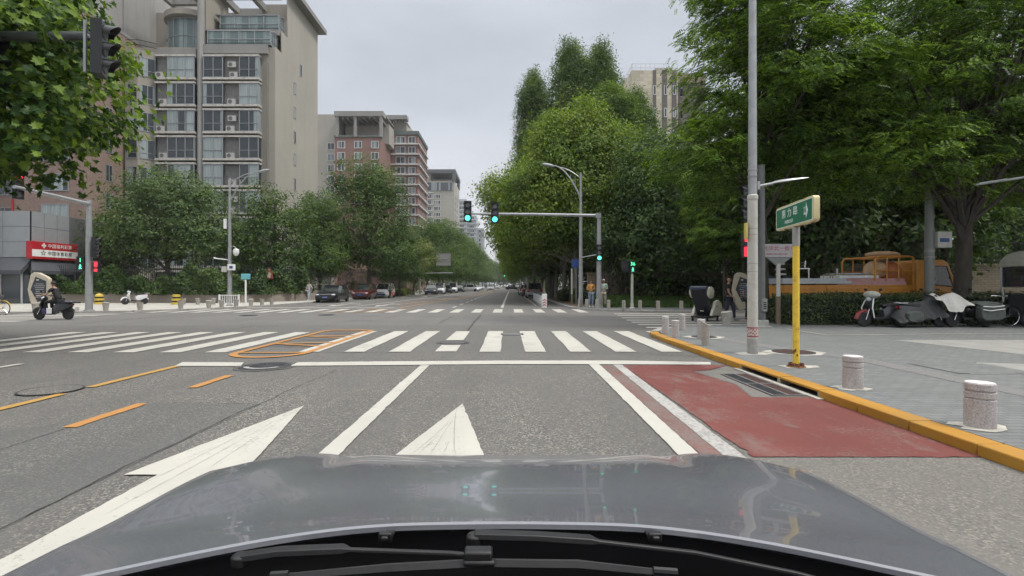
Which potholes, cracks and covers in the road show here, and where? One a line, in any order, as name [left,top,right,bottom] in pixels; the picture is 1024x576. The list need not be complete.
drain grate [720,368,824,400]
manhole cover [232,362,295,371]
manhole cover [14,384,86,396]
